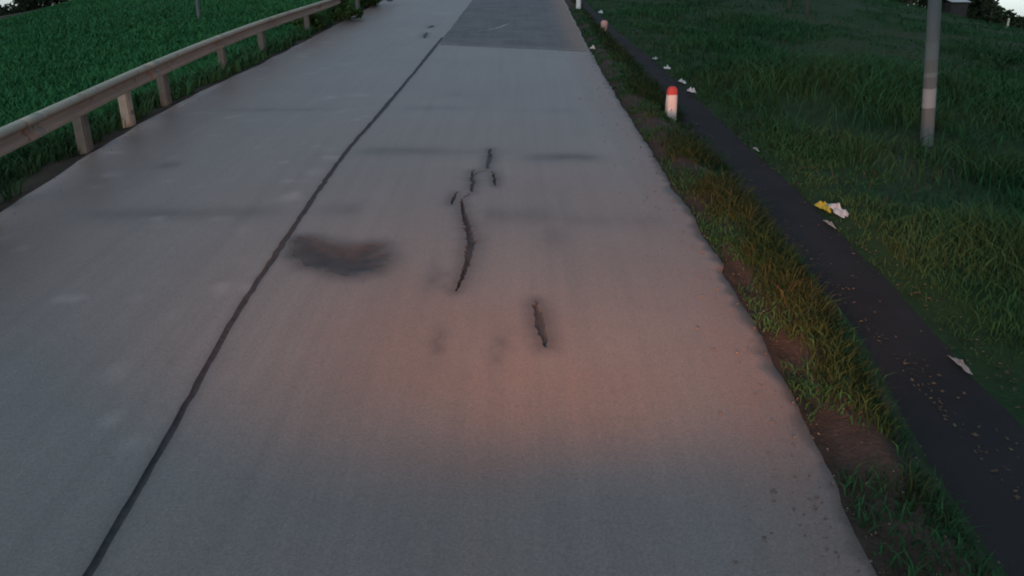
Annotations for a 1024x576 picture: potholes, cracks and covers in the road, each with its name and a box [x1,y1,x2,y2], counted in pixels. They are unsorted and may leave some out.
crack [82,26,497,576]
crack [532,301,548,347]
